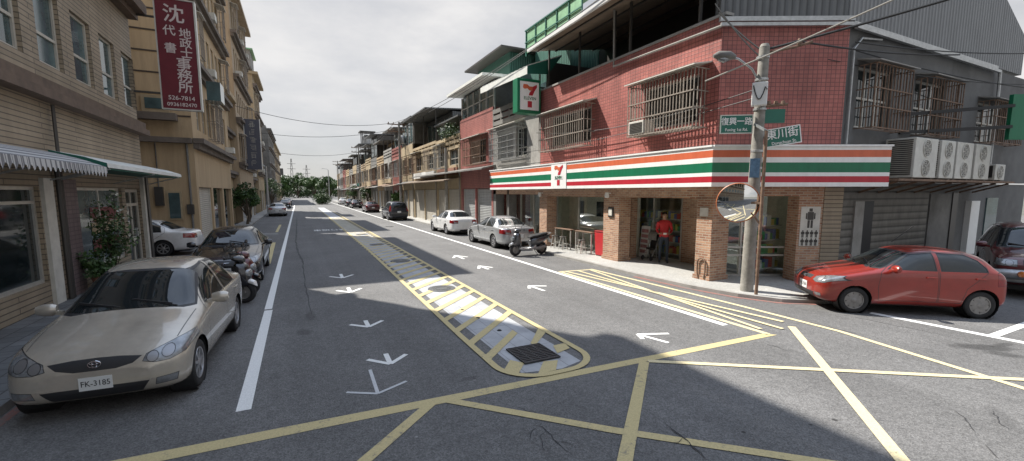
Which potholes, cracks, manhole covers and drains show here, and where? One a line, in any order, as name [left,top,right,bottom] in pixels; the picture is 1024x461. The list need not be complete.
crack [667,425,707,460]
crack [522,408,574,450]
crack [295,220,312,314]
drain grate [506,343,561,364]
utility cover [426,285,465,303]
